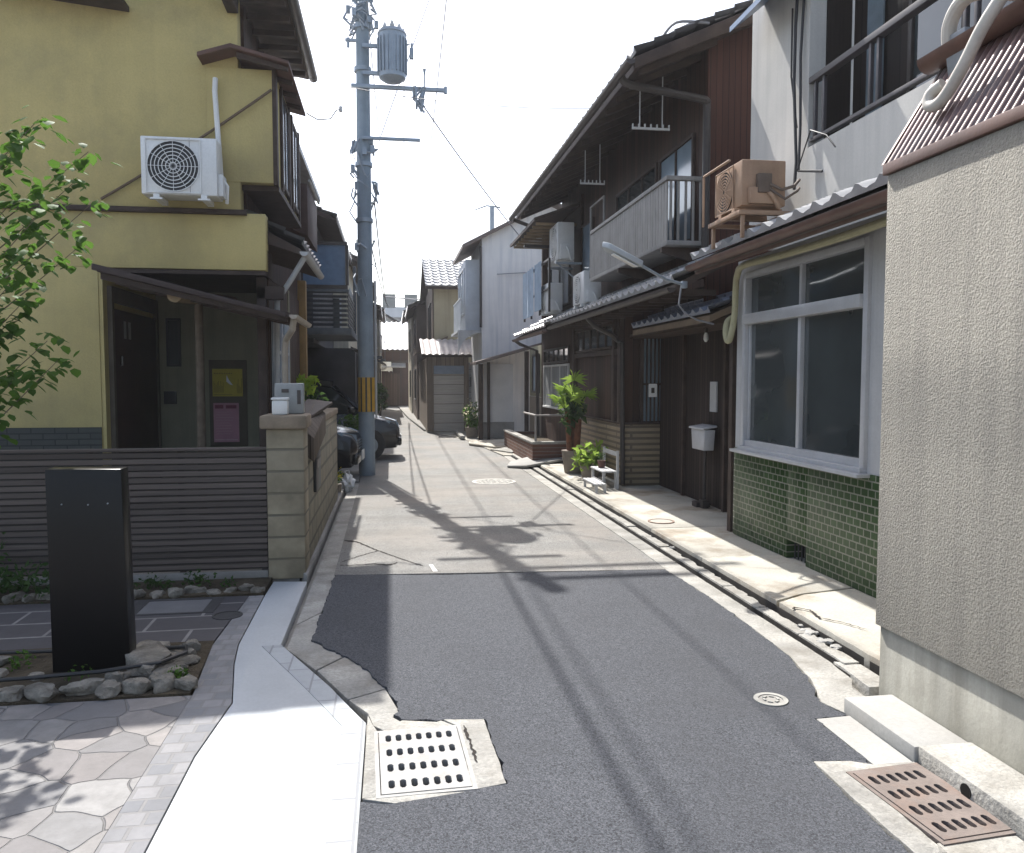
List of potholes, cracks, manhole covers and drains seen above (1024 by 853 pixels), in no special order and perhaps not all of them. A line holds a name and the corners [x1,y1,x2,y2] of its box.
crack [340,540,423,566]
manhole cover [212,610,243,620]
crack [792,607,865,629]
crack [463,725,478,762]
manhole cover [753,692,788,707]
drain grate [374,725,478,799]
drain grate [846,763,1016,846]
